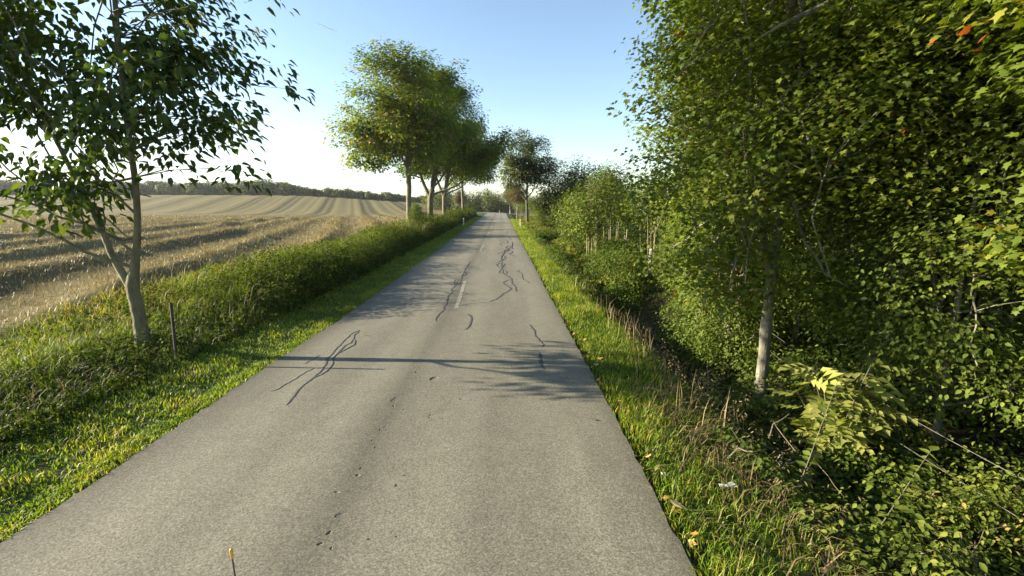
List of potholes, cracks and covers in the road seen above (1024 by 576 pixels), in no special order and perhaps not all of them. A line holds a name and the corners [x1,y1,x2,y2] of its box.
crack [529,324,545,369]
crack [271,330,360,405]
crack [435,261,473,330]
crack [490,232,529,302]
